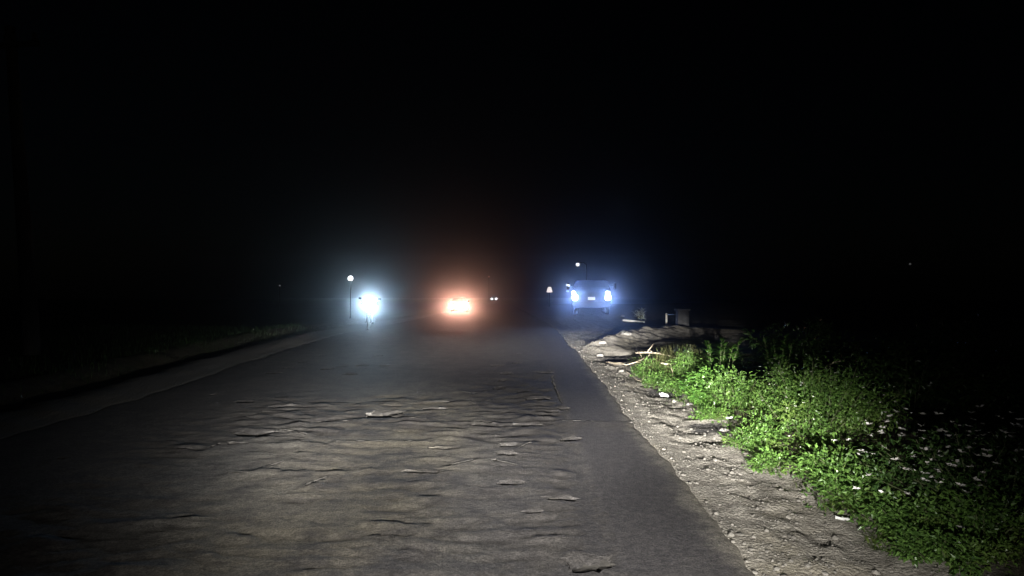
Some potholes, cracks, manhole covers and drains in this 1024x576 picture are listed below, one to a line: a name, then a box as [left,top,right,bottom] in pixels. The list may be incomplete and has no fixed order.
pothole [229,428,280,437]
crack [409,391,486,418]
crack [282,409,363,443]
pothole [558,551,616,573]
crack [448,442,531,466]
pothole [365,409,406,418]
